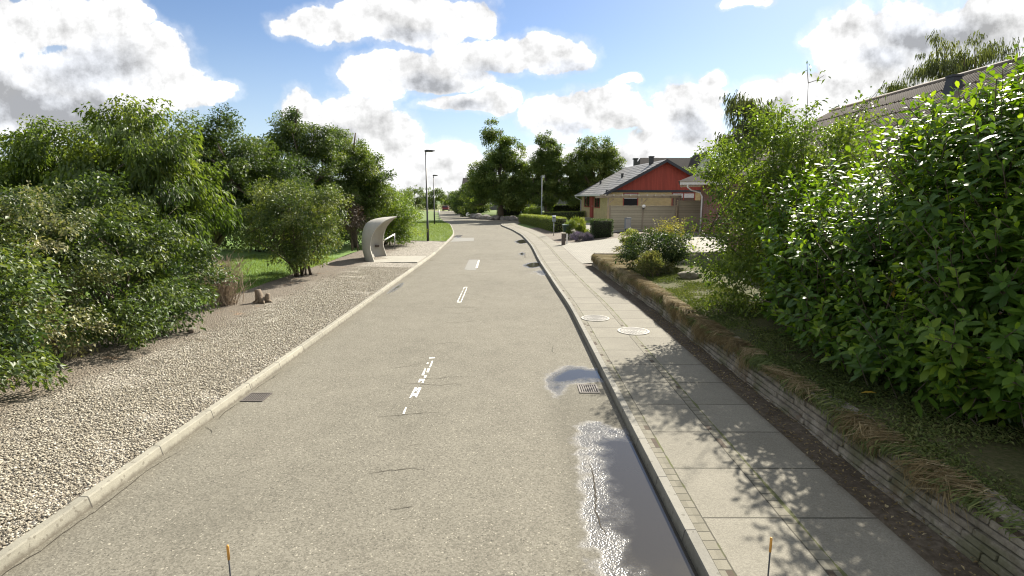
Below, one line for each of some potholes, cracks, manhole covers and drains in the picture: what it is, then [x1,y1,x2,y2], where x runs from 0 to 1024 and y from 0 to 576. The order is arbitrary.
crack [589,464,607,536]
drain grate [577,384,600,393]
drain grate [240,393,273,402]
manhole cover [617,327,650,335]
